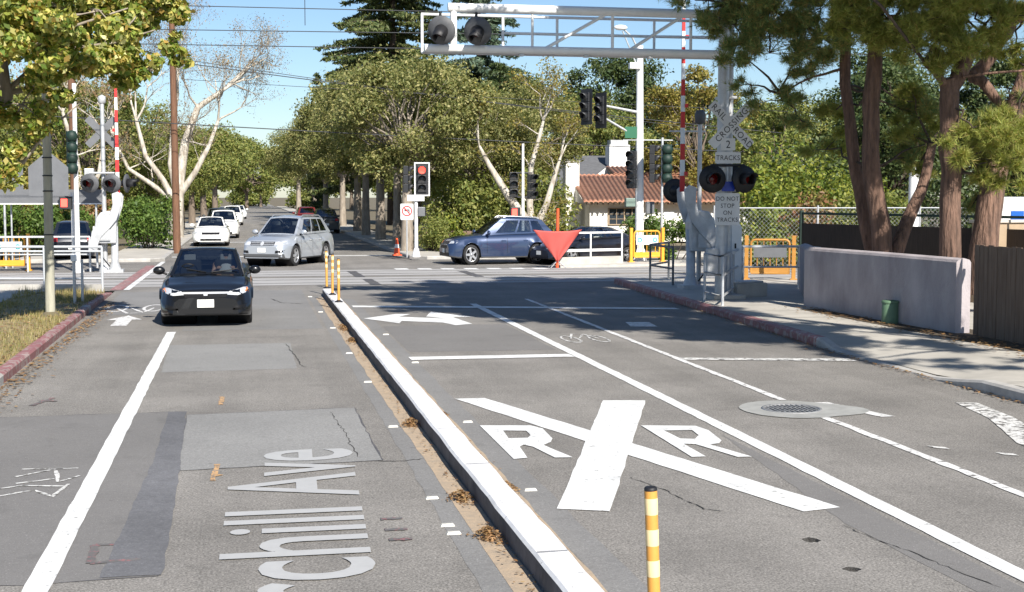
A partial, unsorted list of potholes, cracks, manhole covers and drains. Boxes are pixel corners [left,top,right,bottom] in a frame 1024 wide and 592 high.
crack [847,526,999,587]
manhole cover [739,400,869,418]
